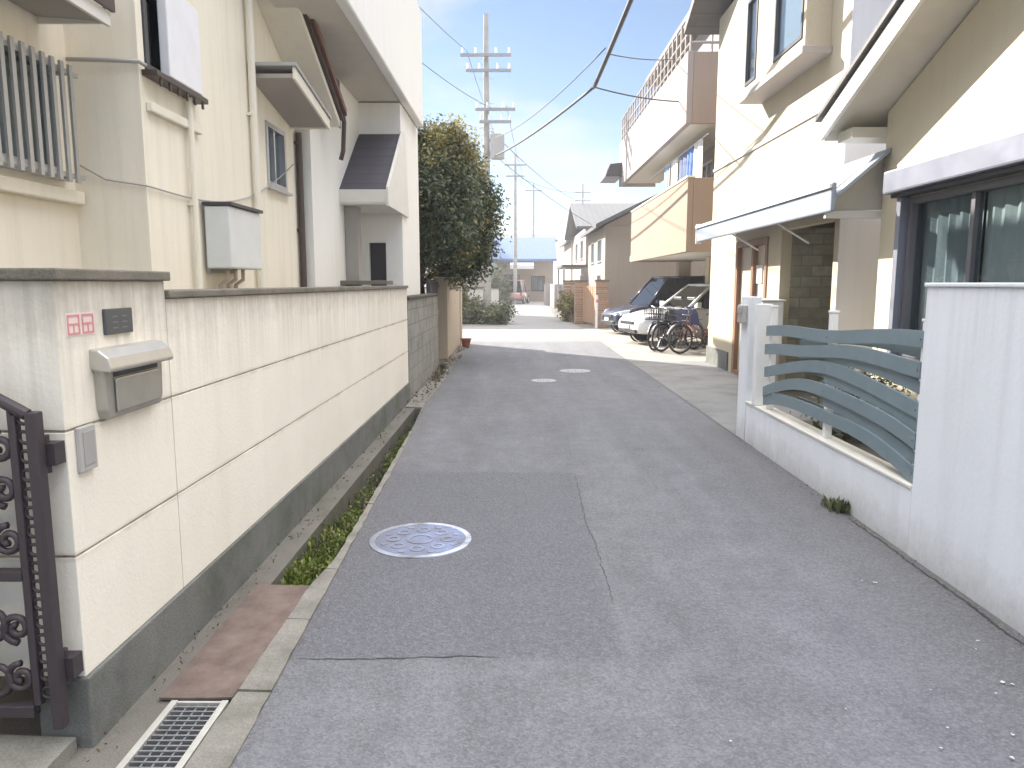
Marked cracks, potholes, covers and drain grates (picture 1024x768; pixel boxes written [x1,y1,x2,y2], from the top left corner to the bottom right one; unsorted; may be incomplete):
drain grate [116,700,229,768]
manhole cover [369,523,471,559]
